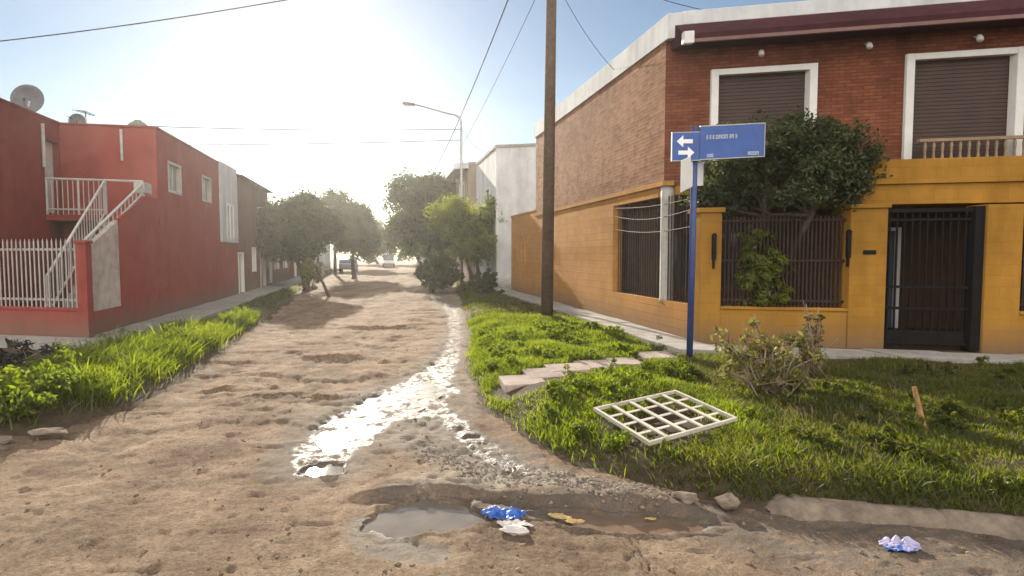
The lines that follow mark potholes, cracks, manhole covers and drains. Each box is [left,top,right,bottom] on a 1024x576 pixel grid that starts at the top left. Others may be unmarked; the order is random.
pothole [303,353,368,364]
pothole [345,485,511,544]
pothole [292,460,350,480]
pothole [520,506,730,539]
